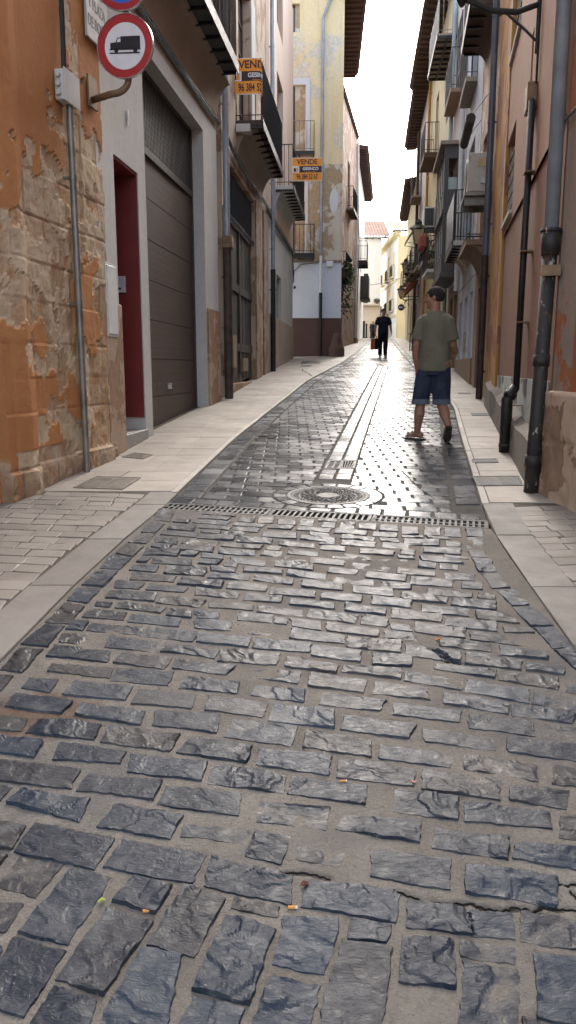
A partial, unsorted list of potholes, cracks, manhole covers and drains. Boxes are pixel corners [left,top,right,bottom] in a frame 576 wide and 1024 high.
manhole cover [287,486,369,506]
crack [397,883,576,936]
drain grate [370,514,489,529]
drain grate [324,460,357,470]
crack [285,872,331,881]
utility cover [73,476,141,490]
drain grate [163,503,273,515]
utility cover [472,476,524,487]
drain grate [267,509,373,521]
